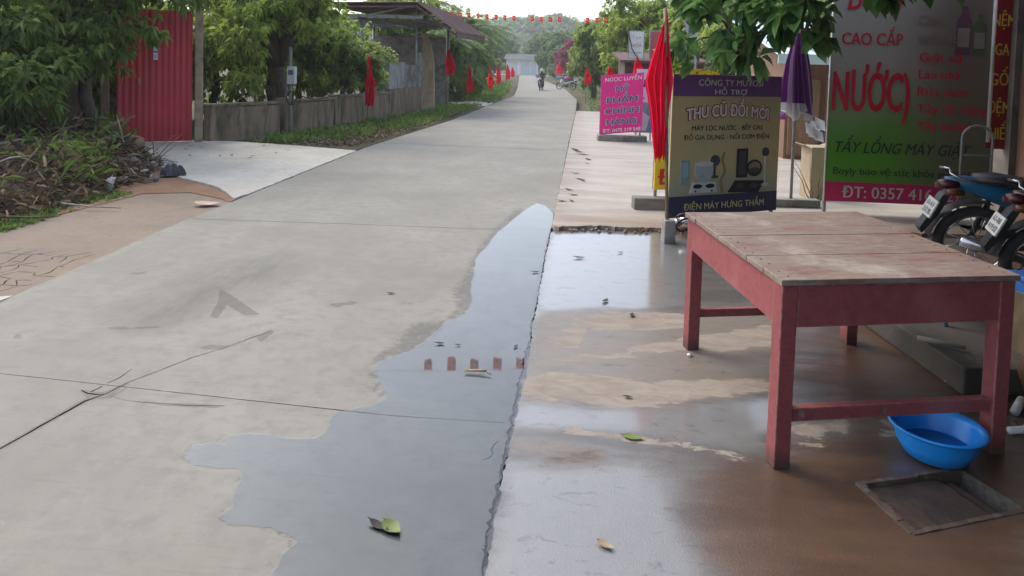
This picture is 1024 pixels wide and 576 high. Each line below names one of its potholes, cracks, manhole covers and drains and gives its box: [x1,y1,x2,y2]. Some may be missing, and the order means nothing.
crack [0,102,577,576]
manhole cover [855,469,1024,536]
